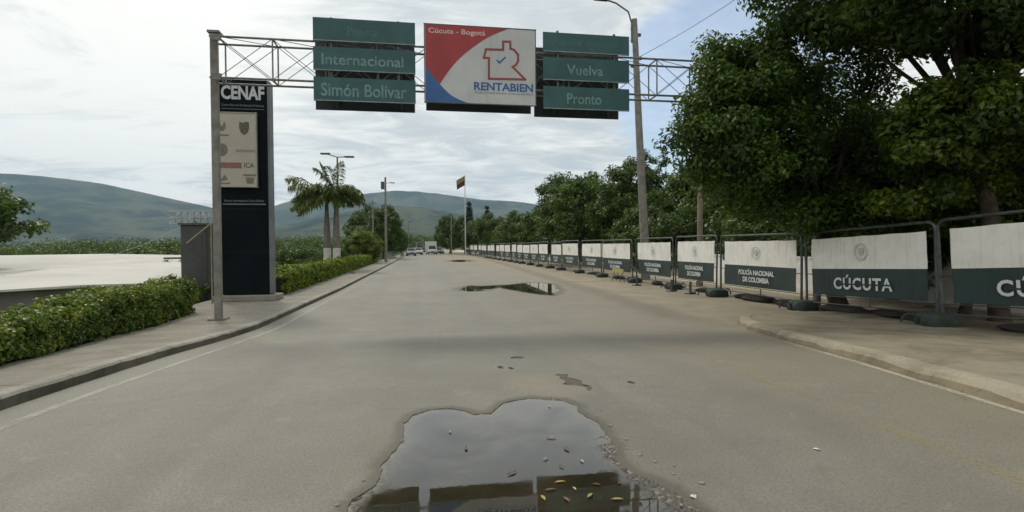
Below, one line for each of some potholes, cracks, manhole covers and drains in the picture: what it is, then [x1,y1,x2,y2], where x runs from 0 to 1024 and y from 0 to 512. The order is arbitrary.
pothole [347,398,702,512]
pothole [458,282,561,296]
